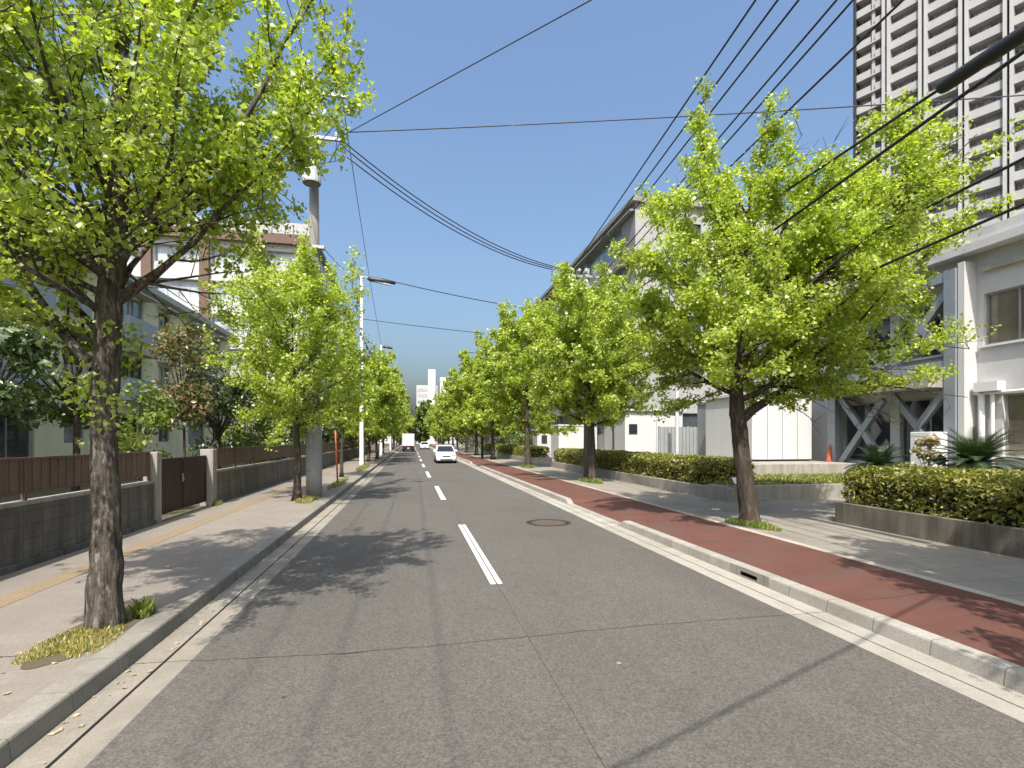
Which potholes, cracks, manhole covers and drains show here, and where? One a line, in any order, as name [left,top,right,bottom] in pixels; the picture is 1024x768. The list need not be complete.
drain grate [731,562,781,588]
